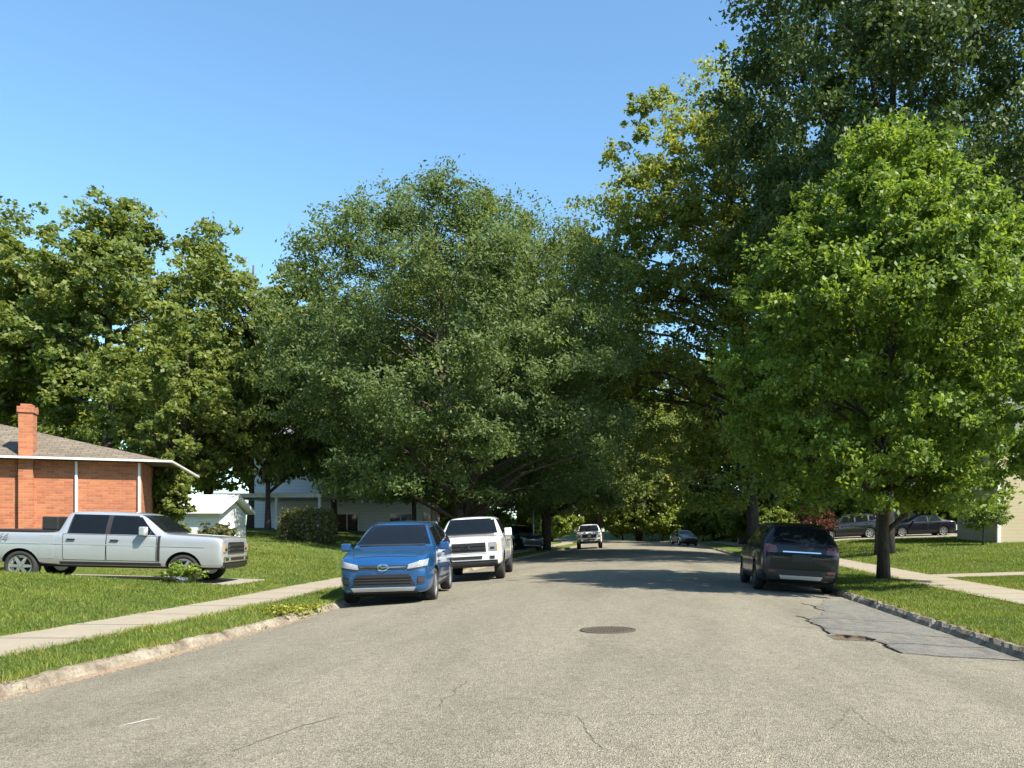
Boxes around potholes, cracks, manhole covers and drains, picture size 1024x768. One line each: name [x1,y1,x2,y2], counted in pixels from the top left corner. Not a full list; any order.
manhole cover [580,626,636,634]
crack [232,716,337,751]
